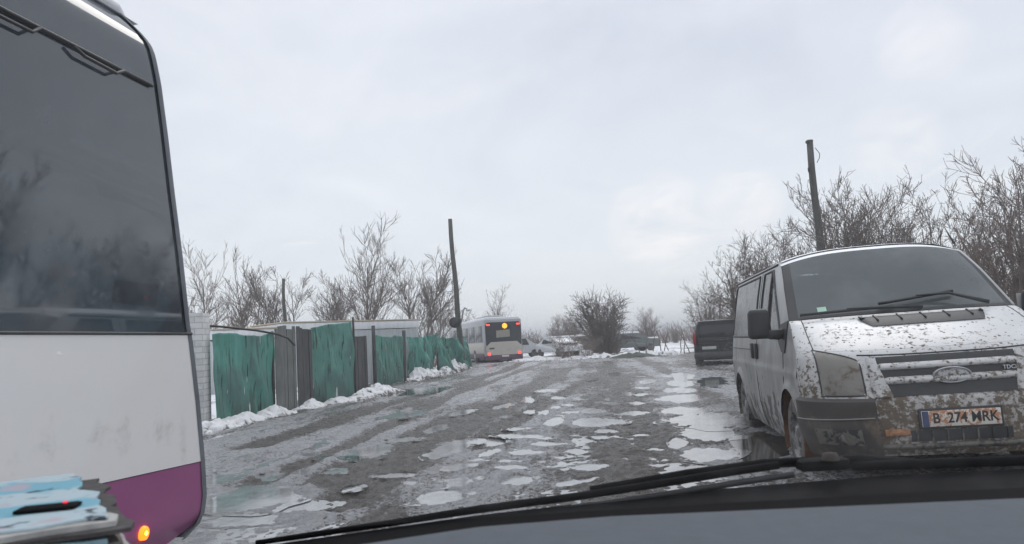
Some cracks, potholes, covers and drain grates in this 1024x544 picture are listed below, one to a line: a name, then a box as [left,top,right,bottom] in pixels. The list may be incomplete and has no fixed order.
pothole [265,498,339,515]
pothole [494,472,538,487]
pothole [692,376,732,392]
pothole [416,435,486,464]
pothole [550,460,615,473]
pothole [203,480,320,517]
pothole [667,443,751,465]
pothole [564,415,635,429]
pothole [337,484,367,496]
pothole [666,435,690,450]
pothole [538,415,568,427]
pothole [646,393,711,404]
